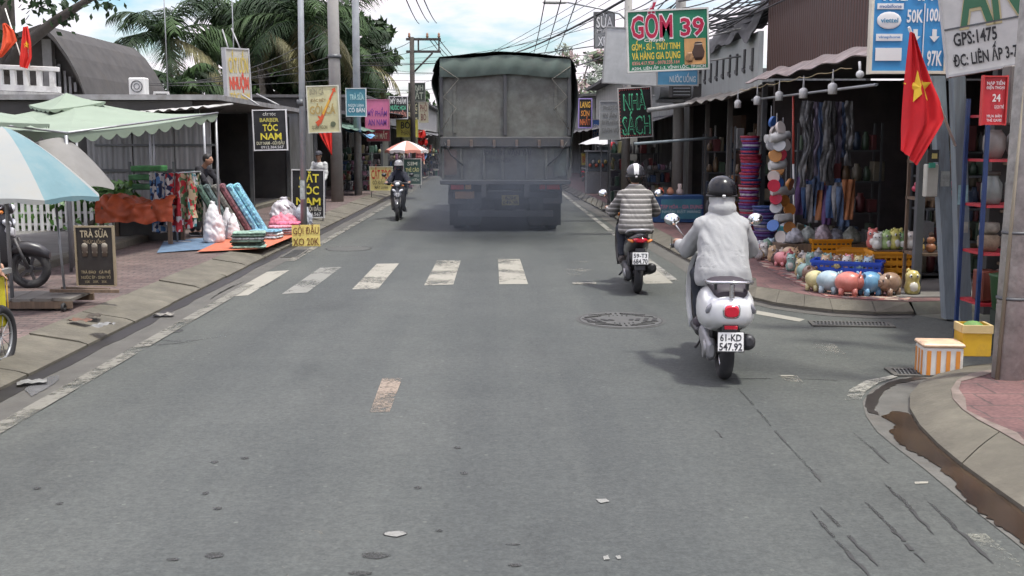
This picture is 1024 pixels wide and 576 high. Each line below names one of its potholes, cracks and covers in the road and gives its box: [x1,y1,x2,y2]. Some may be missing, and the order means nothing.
drain grate [884,367,934,377]
drain grate [808,320,896,328]
crack [737,387,821,481]
crack [812,483,994,576]
manhole cover [576,312,666,329]
